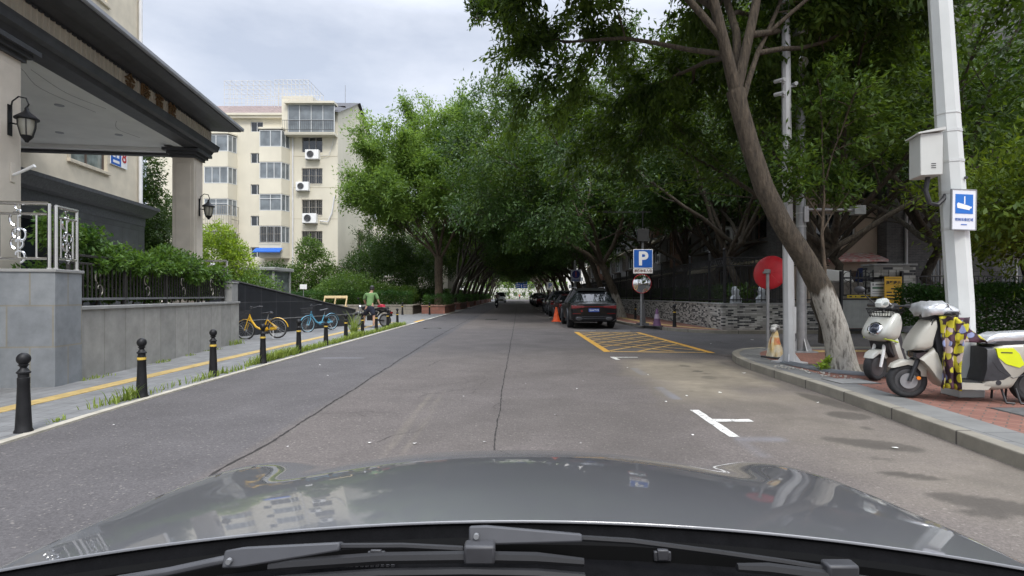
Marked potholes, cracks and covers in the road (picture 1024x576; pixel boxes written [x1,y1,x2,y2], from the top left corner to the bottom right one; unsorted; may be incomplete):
crack [209,311,727,476]
